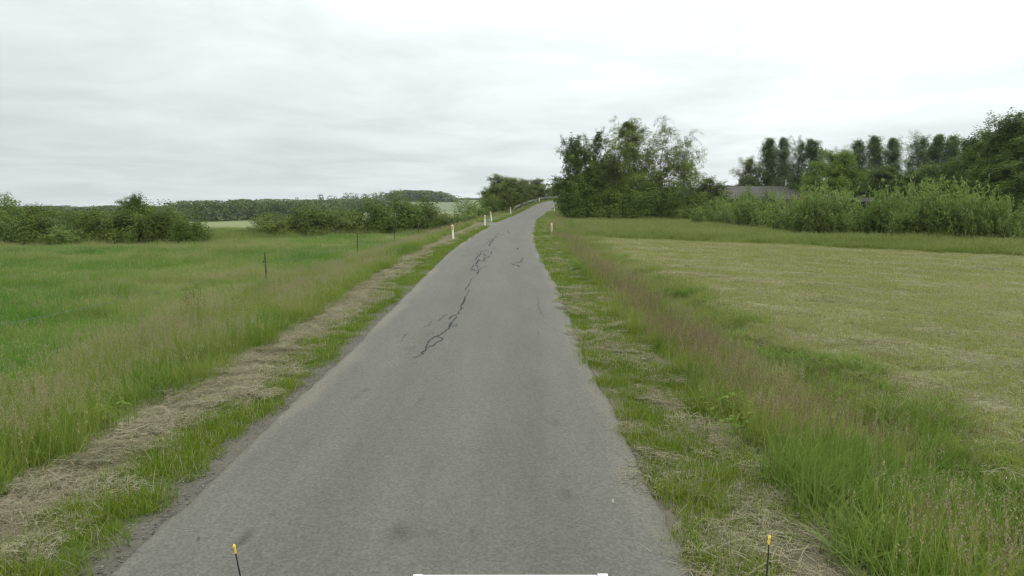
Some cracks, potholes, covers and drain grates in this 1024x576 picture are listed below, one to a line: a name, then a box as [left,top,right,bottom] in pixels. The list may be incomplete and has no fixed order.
crack [401,226,523,358]
